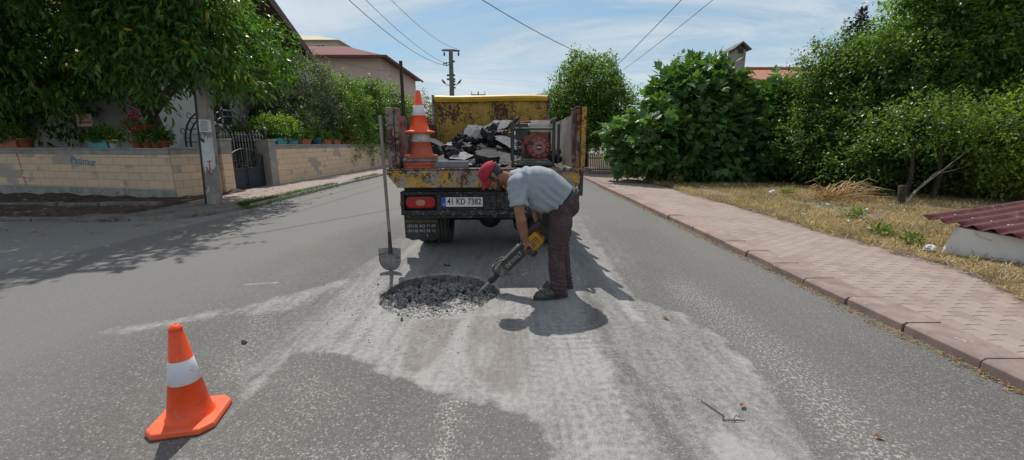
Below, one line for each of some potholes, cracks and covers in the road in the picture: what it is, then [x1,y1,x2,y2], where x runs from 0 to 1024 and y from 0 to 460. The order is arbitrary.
pothole [379,275,501,319]
